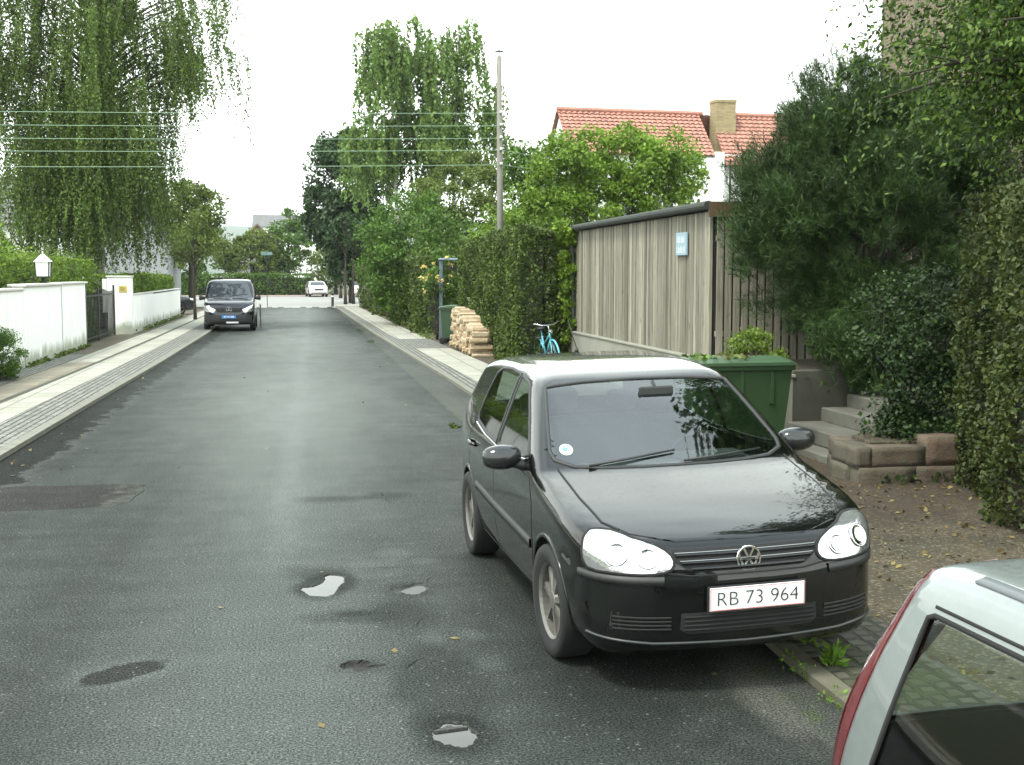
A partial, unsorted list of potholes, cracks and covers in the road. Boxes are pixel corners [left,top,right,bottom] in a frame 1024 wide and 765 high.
pothole [389,583,430,595]
pothole [339,659,387,672]
pothole [428,720,479,747]
pothole [300,574,345,597]
